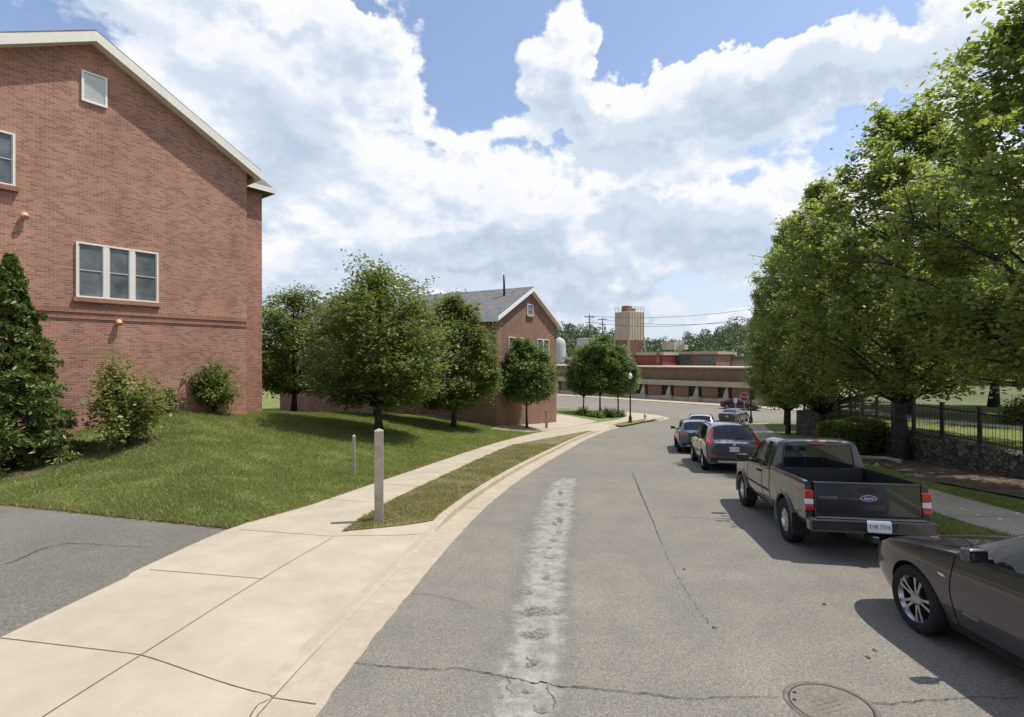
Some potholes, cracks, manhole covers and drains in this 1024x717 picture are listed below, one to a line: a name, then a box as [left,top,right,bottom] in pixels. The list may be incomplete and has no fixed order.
pothole [519,605,550,616]
crack [354,662,762,708]
manhole cover [783,681,882,717]
